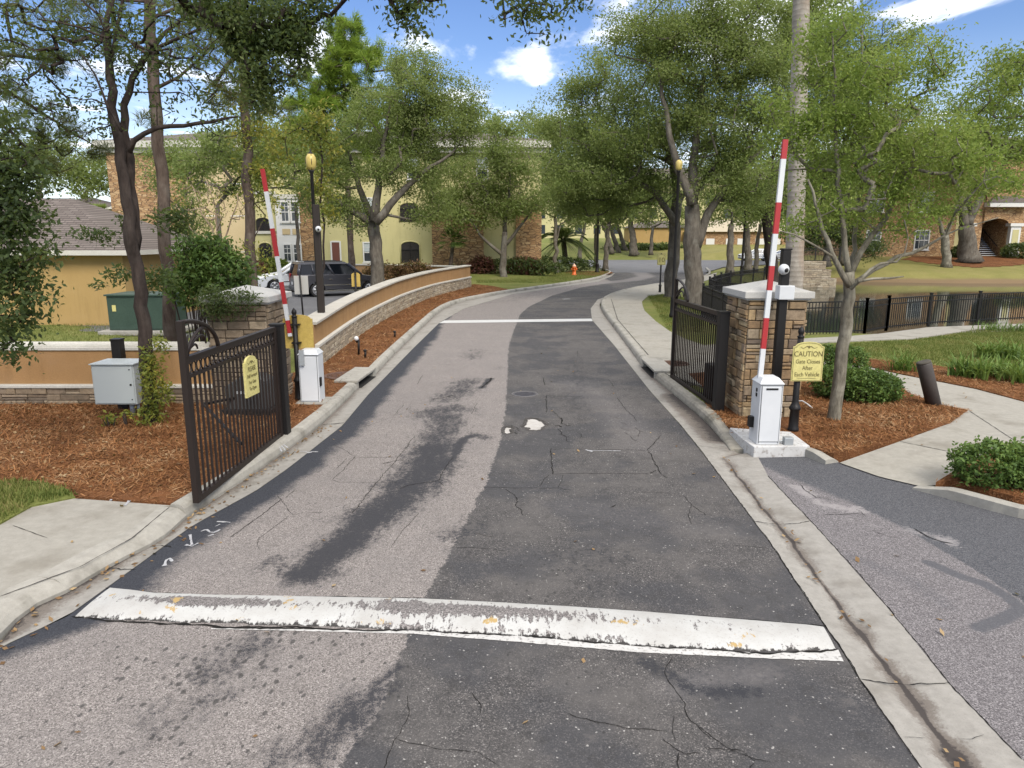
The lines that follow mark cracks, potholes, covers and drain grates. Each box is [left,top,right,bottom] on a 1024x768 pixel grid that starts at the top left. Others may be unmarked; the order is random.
crack [503,378,667,515]
crack [570,658,769,767]
crack [231,493,321,548]
crack [384,695,499,768]
